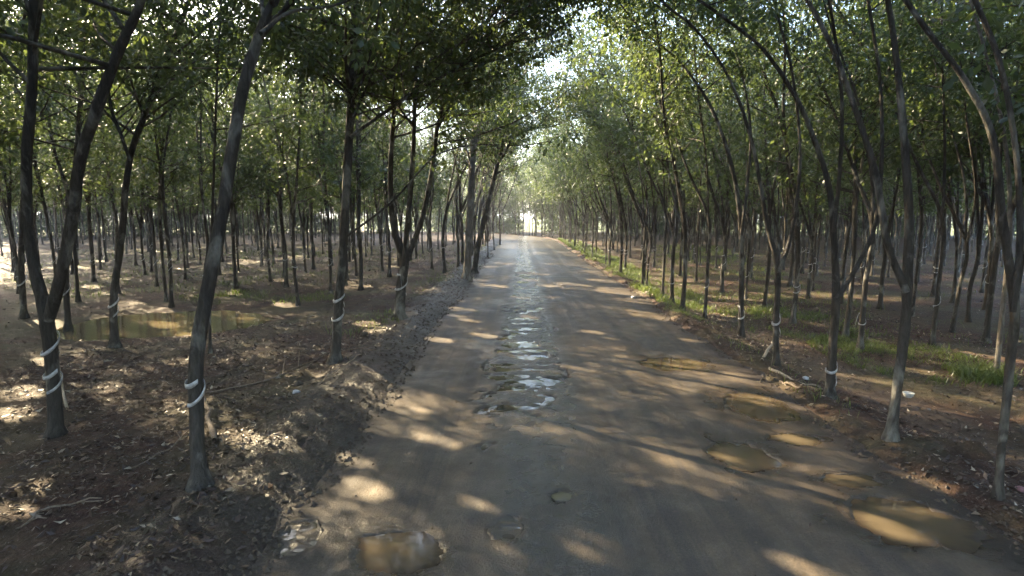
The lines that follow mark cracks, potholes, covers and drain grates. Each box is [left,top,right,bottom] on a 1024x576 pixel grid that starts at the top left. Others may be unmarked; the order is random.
pothole [550,490,573,503]
pothole [344,528,453,576]
pothole [719,390,807,425]
pothole [761,432,826,447]
